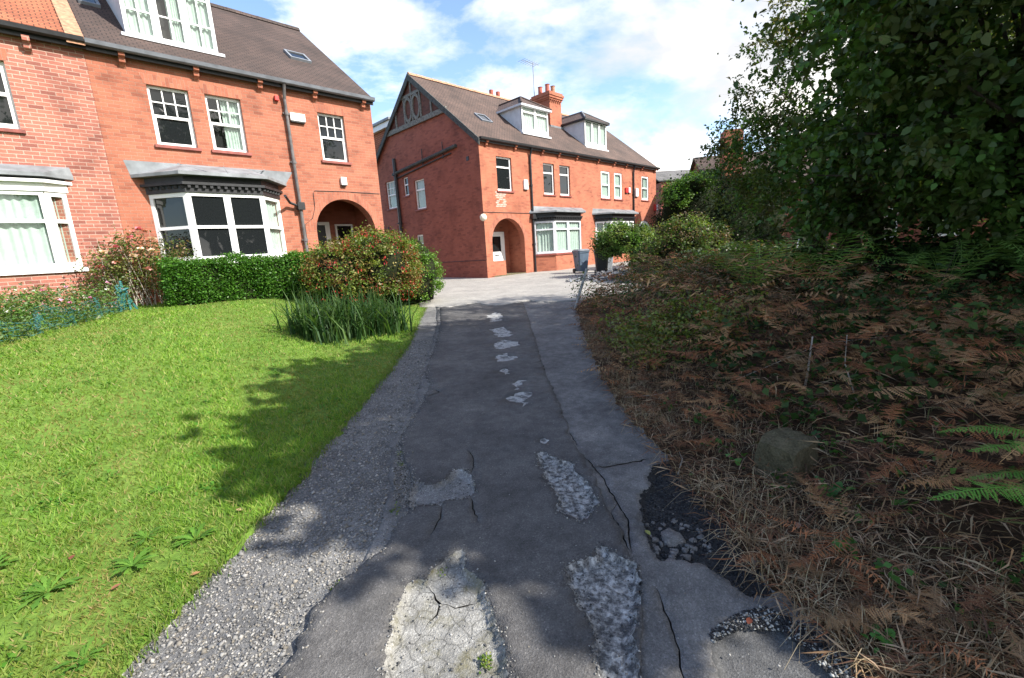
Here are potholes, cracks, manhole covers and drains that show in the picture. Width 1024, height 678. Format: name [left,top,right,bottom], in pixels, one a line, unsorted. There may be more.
pothole [638,461,771,598]
pothole [564,545,641,678]
crack [570,434,649,553]
crack [655,587,684,678]
pothole [711,619,835,678]
pothole [537,452,600,521]
